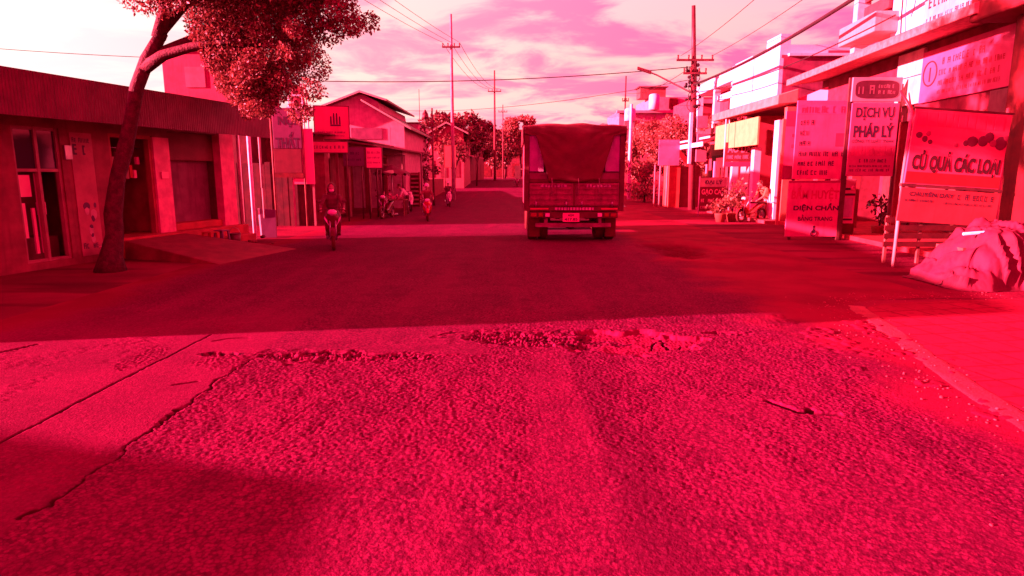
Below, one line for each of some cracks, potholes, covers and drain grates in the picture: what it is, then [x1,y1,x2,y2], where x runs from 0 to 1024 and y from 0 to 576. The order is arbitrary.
pothole [564,329,712,357]
pothole [430,328,632,351]
crack [0,334,260,520]
